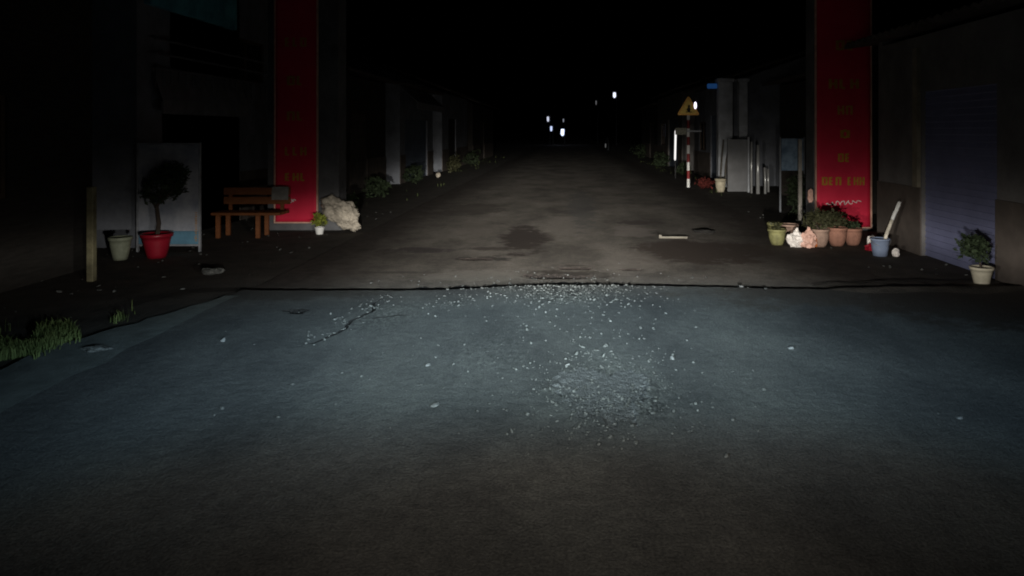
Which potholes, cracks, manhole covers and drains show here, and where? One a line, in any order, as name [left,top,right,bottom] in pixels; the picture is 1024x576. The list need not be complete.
crack [296,281,778,347]
